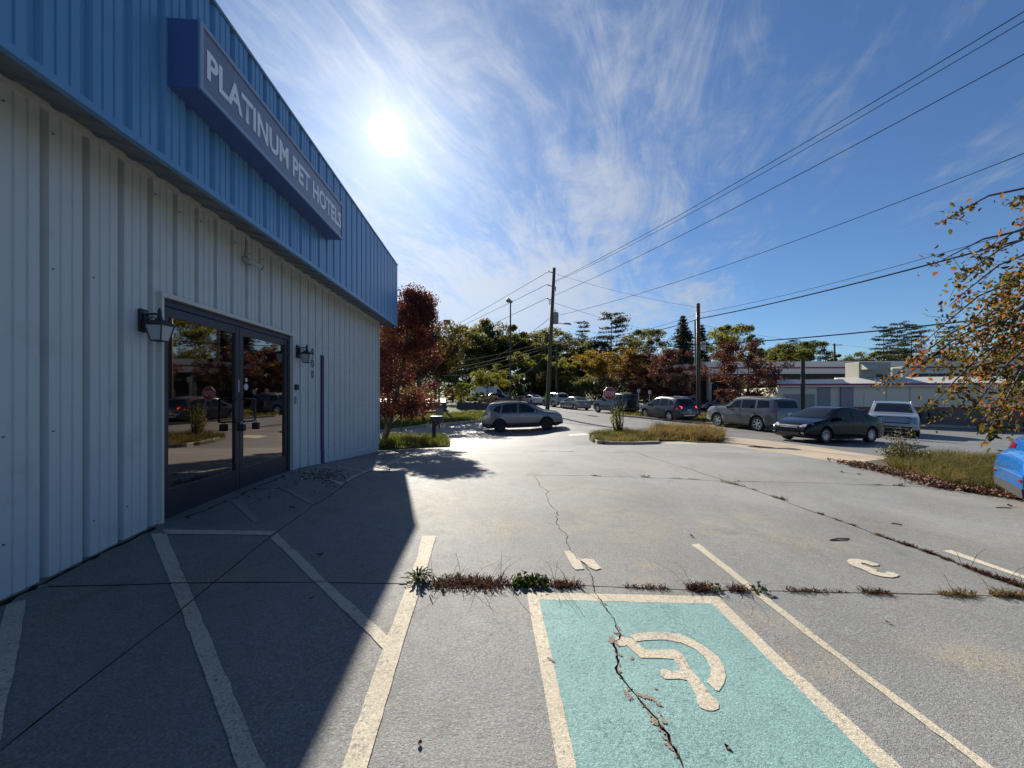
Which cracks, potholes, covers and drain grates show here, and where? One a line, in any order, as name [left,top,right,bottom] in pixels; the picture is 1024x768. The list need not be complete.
crack [537,479,684,768]
